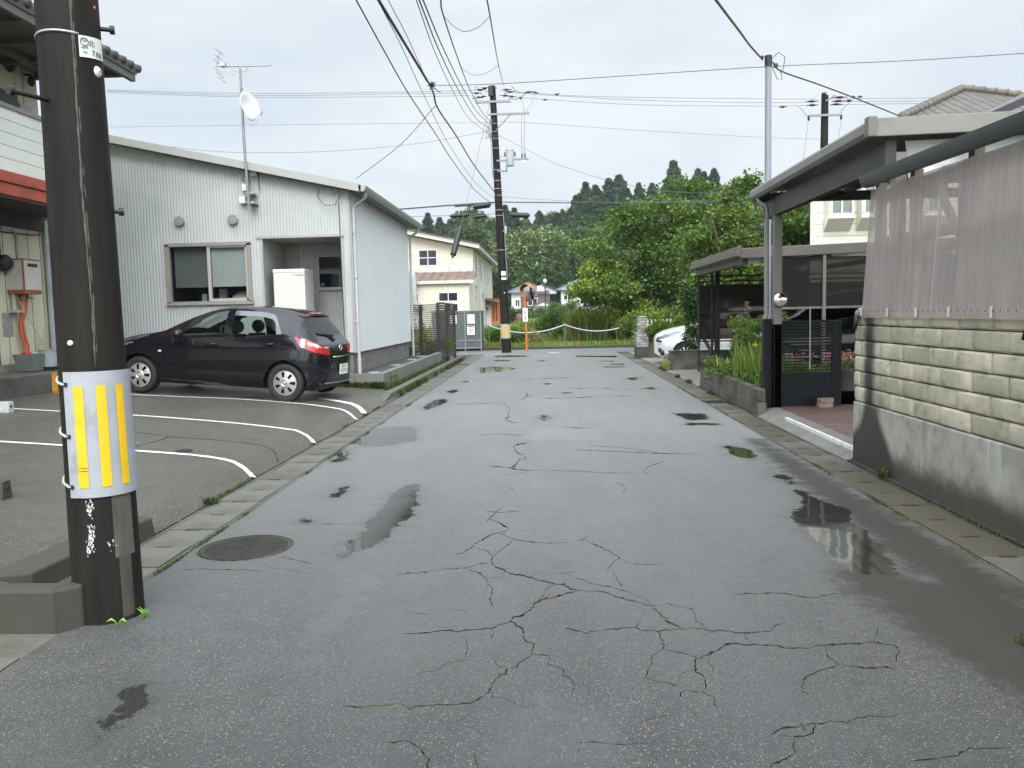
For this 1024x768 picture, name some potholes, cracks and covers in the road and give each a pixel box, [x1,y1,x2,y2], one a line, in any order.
crack [576,708,699,761]
crack [461,377,681,493]
crack [770,715,898,767]
crack [346,508,900,710]
crack [390,733,431,768]
manhole cover [198,535,294,561]
